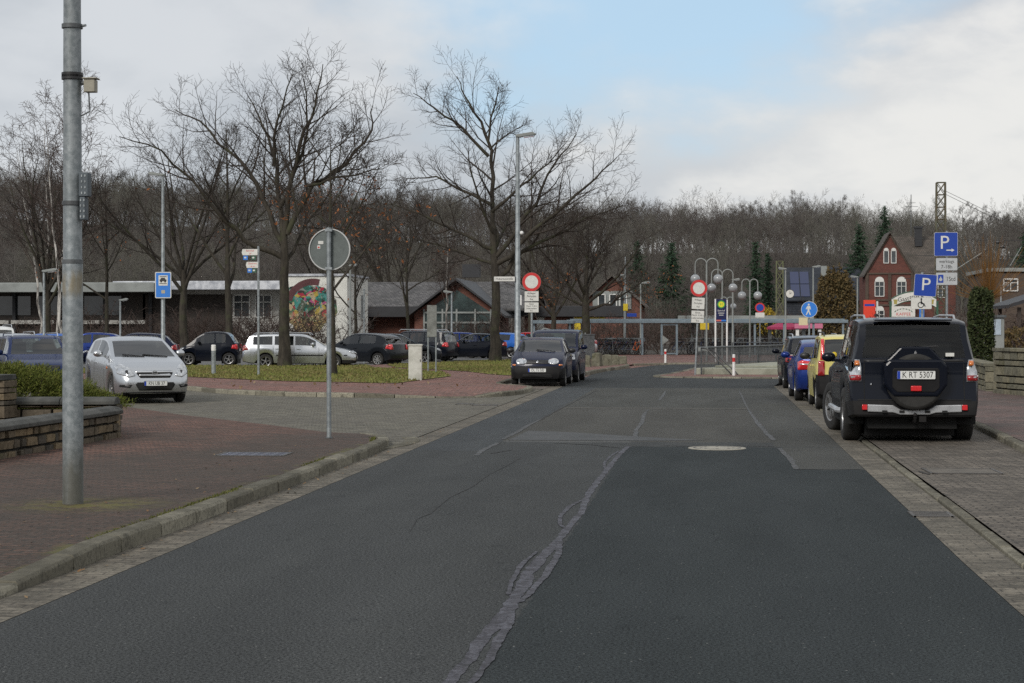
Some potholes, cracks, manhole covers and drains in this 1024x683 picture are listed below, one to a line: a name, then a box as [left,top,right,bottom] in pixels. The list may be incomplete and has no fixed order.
crack [409,450,520,533]
